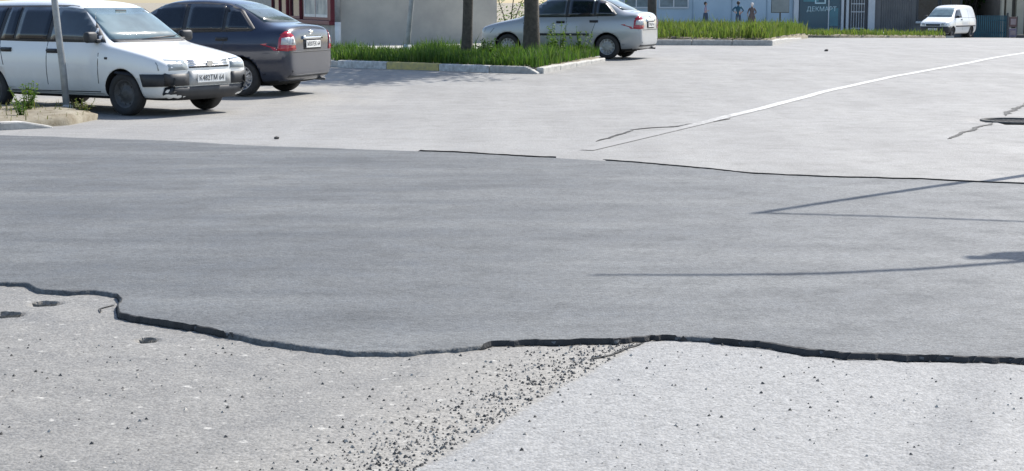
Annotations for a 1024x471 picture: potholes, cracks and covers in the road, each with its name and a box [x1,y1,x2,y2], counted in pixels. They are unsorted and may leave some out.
crack [597,118,731,141]
pothole [0,311,22,319]
crack [948,105,1024,139]
